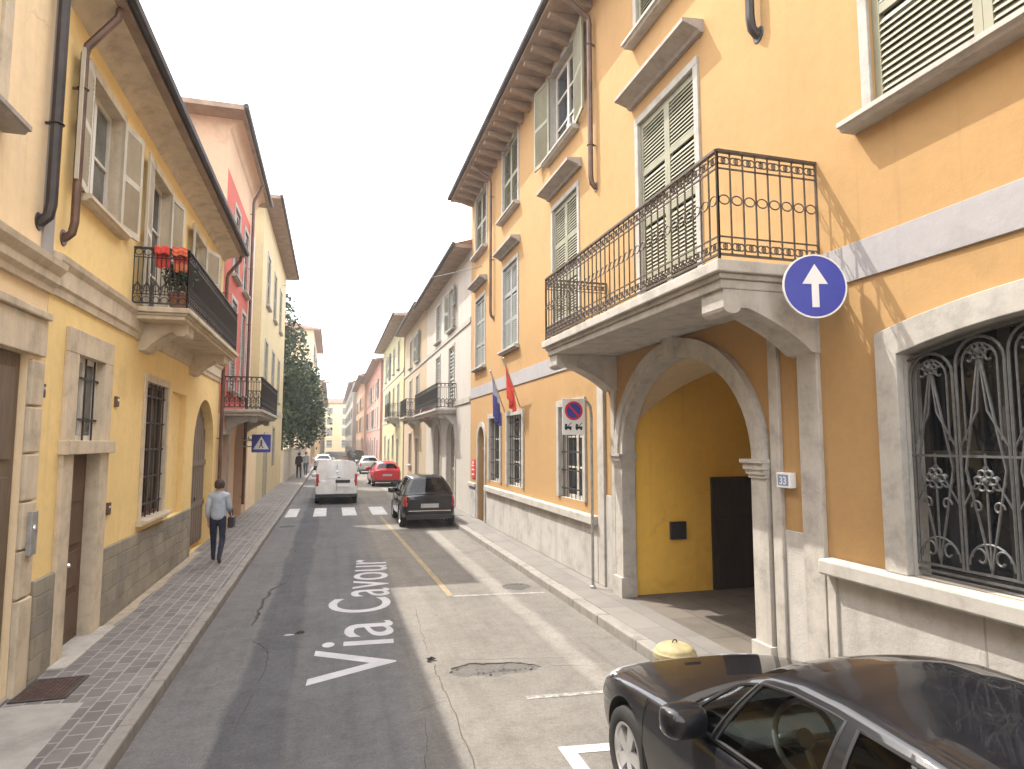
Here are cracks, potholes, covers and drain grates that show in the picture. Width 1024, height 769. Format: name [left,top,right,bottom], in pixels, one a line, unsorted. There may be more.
crack [233,535,297,733]
pothole [449,662,542,677]
